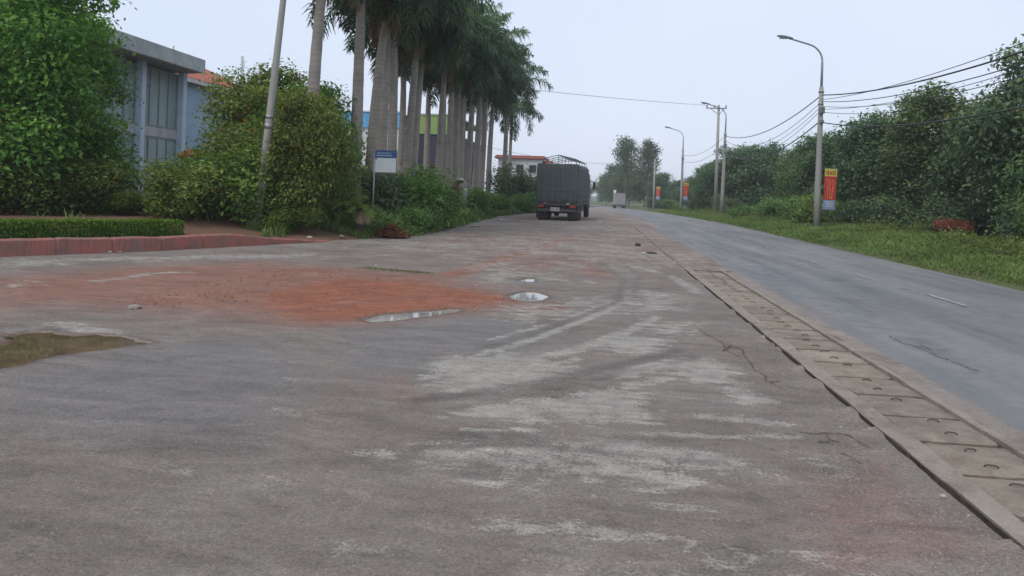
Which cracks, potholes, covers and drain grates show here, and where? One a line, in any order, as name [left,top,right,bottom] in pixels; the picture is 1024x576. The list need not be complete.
pothole [508,291,550,301]
pothole [0,330,156,369]
crack [682,267,1024,550]
pothole [362,309,461,322]
